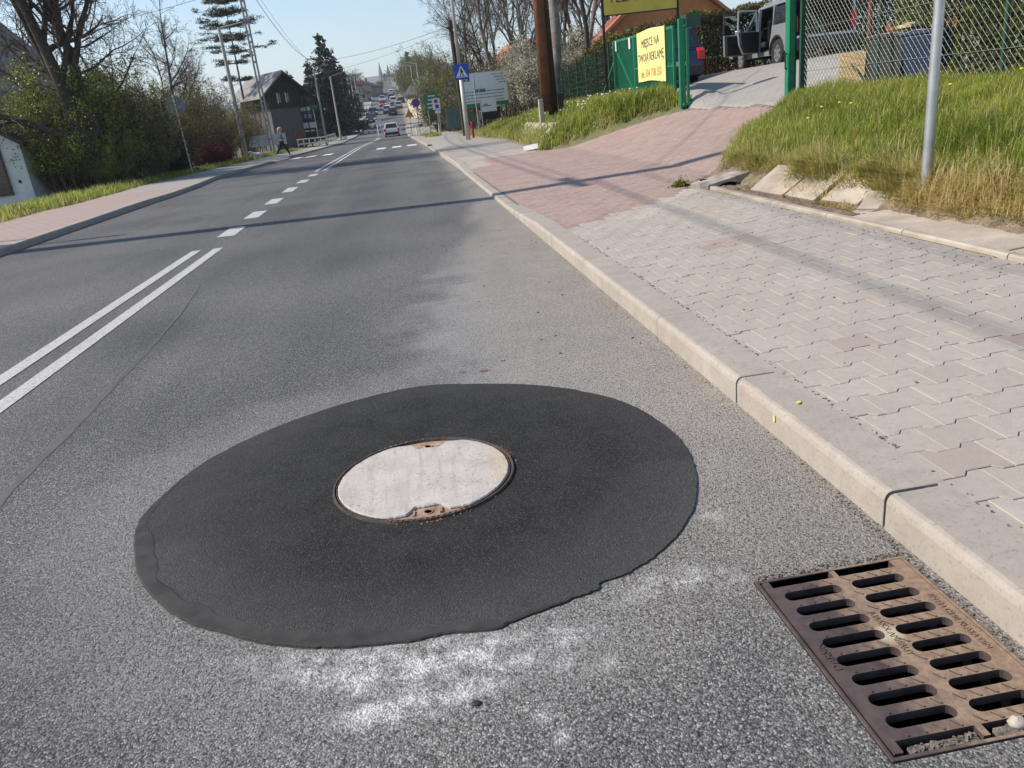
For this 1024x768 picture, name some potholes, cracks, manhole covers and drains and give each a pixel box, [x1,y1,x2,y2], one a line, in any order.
drain grate [755,556,1024,764]
manhole cover [333,437,517,526]
